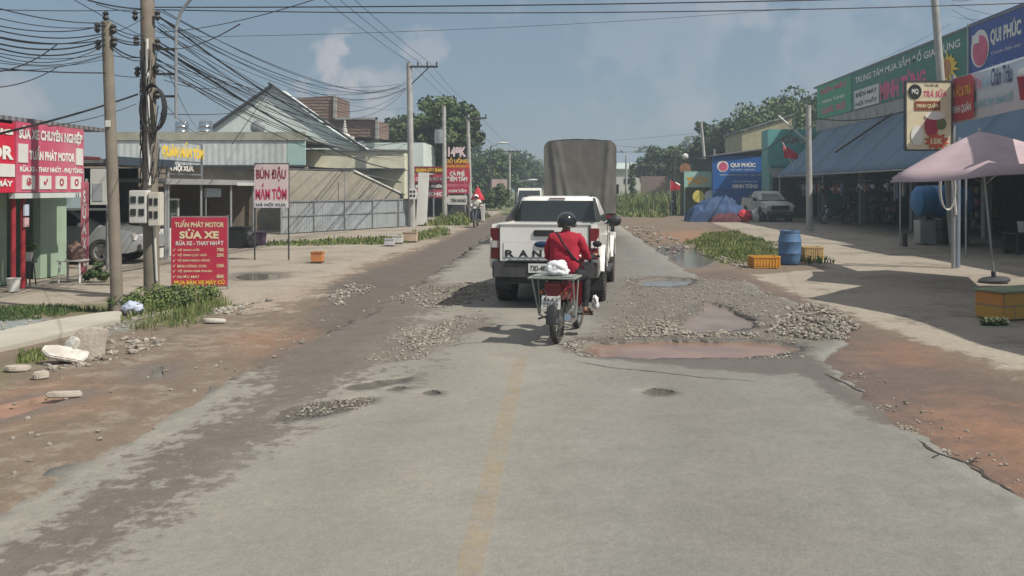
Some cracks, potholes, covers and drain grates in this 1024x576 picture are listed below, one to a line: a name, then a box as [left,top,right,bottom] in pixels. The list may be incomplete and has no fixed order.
pothole [578,339,802,359]
pothole [638,278,695,287]
pothole [682,303,756,333]
crack [917,438,1018,495]
pothole [641,388,674,396]
pothole [345,376,413,390]
pothole [272,397,376,421]
